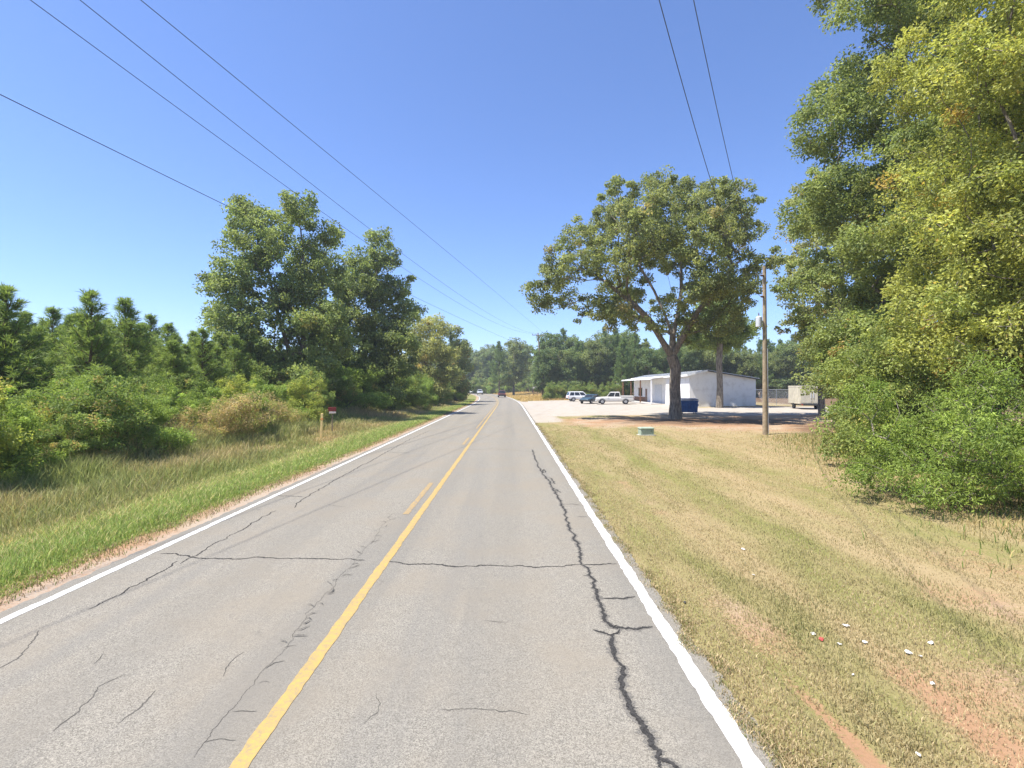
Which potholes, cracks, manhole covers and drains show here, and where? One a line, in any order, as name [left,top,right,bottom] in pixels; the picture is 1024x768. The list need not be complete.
crack [53,654,156,731]
crack [389,449,682,768]
crack [90,430,430,757]
